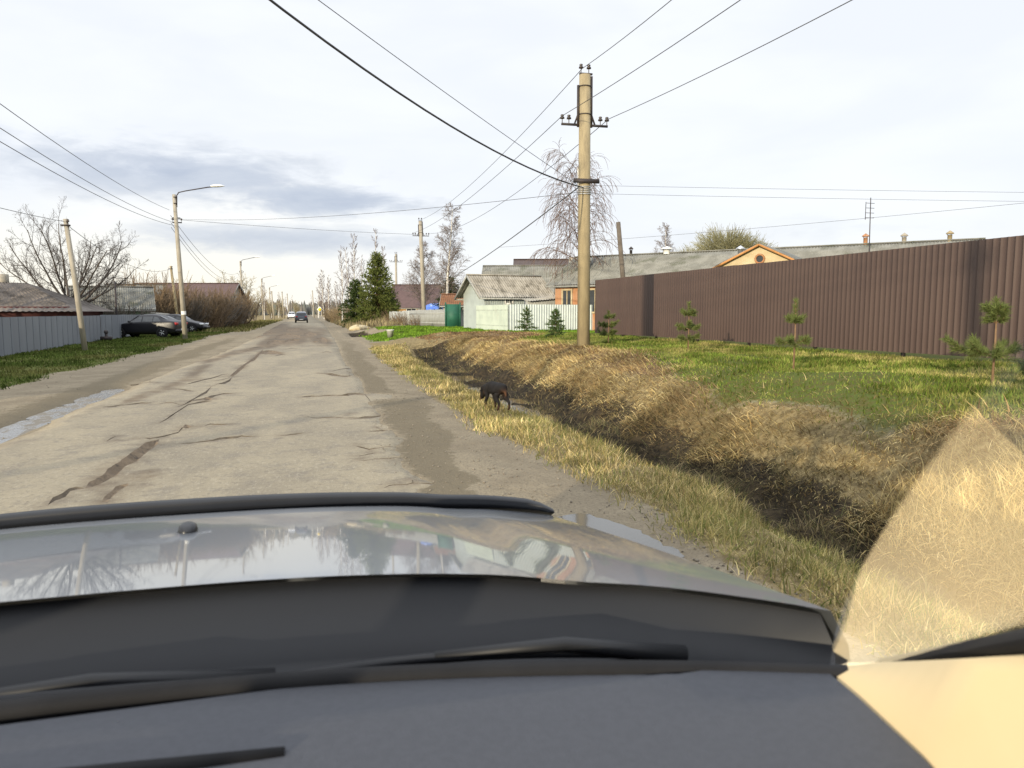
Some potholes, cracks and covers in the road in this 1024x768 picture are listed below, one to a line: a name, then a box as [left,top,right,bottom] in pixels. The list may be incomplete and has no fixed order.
crack [280,351,392,461]
crack [107,374,251,444]
crack [48,487,83,505]
